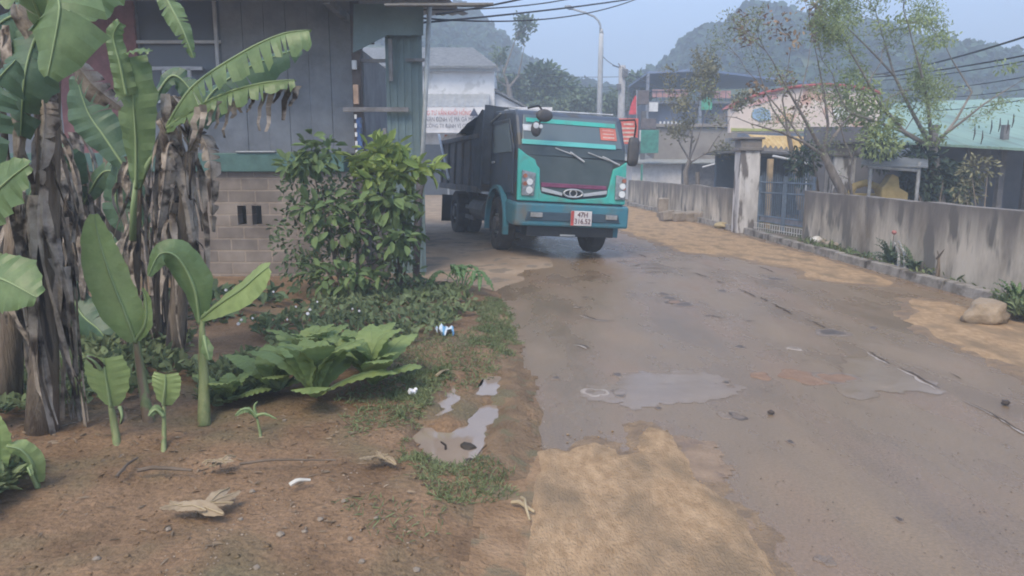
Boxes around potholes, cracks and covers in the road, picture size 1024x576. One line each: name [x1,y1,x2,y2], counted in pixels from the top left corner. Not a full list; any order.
pothole [815,328,853,337]
